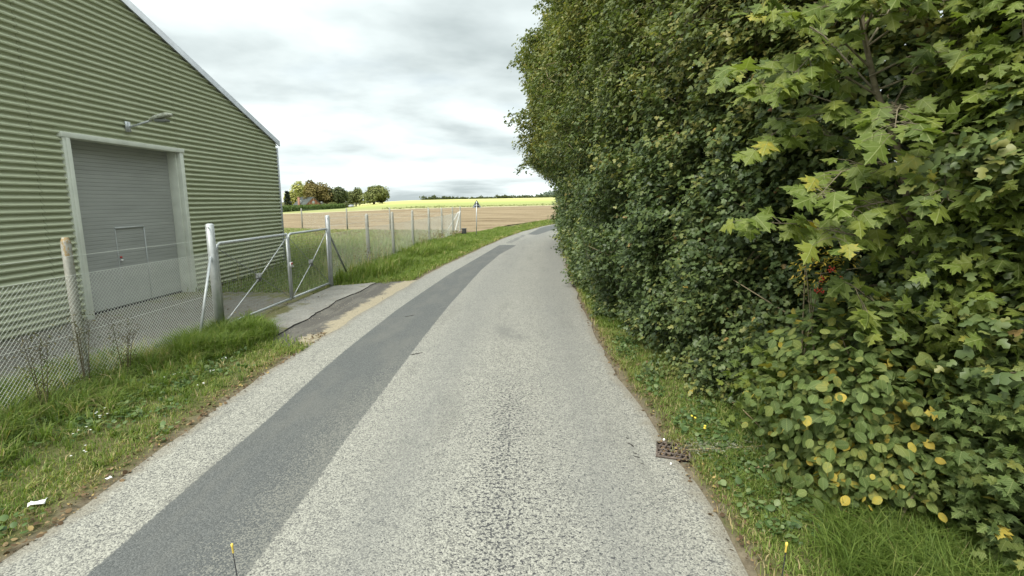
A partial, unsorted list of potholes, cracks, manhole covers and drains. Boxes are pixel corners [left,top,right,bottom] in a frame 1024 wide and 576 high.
crack [268,282,377,342]
drain grate [656,440,691,463]
